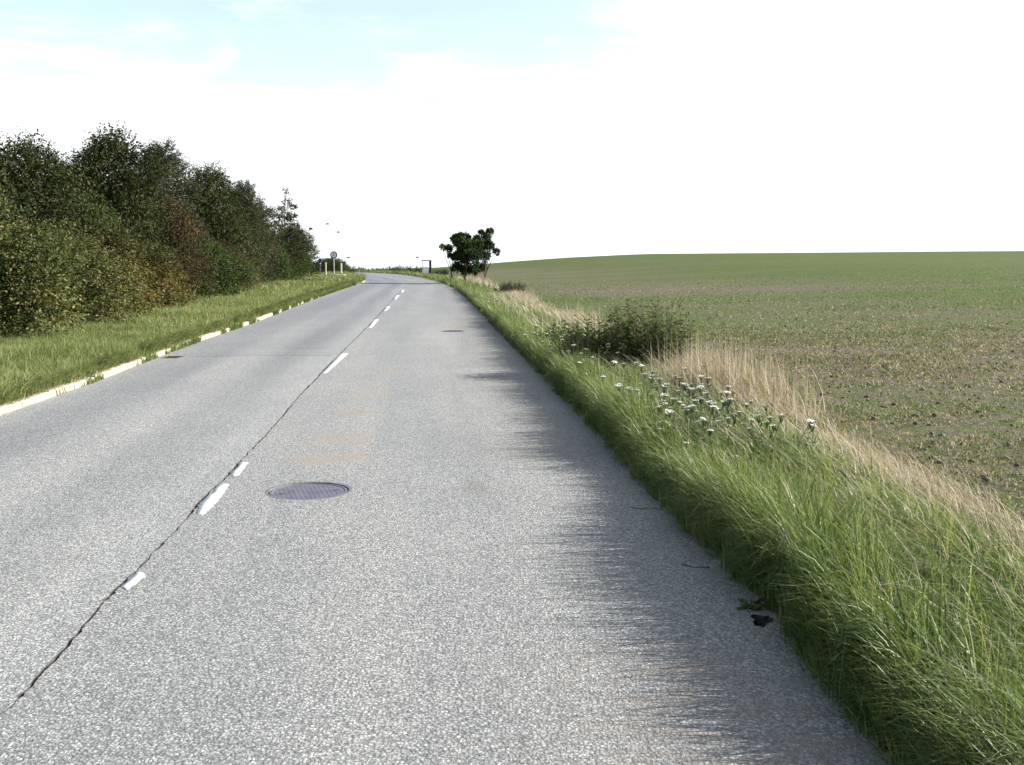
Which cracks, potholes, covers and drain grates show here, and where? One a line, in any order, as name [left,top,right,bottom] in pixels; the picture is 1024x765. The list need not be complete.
crack [0,293,399,714]
manhole cover [265,482,352,500]
pothole [751,614,774,627]
